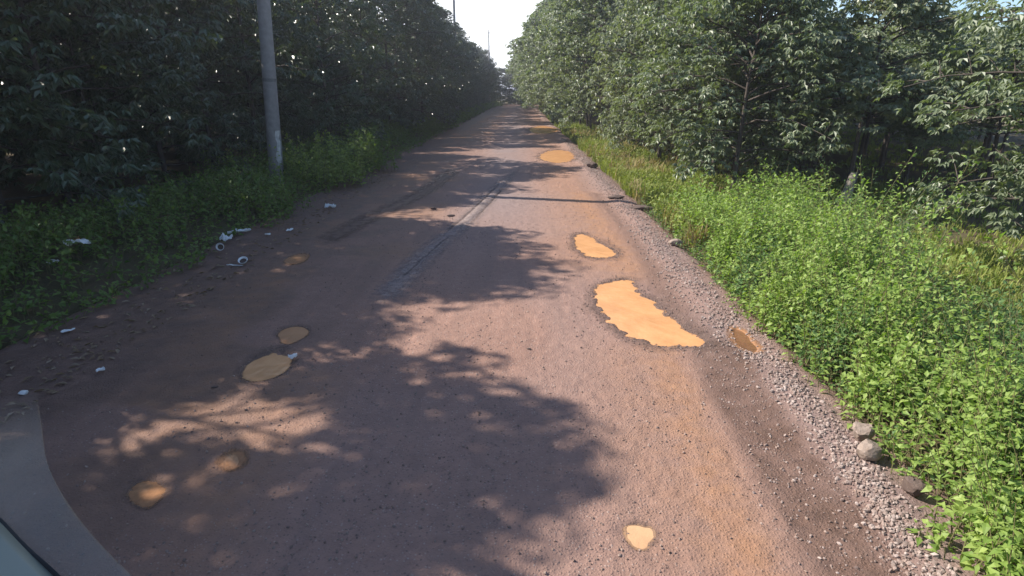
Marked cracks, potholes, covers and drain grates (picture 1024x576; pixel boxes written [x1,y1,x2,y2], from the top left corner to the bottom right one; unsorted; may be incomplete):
pothole [529,126,559,134]
pothole [128,479,167,508]
pothole [277,326,309,345]
pothole [241,349,293,382]
pothole [539,150,575,163]
pothole [572,234,618,259]
pothole [623,524,656,551]
pothole [284,253,309,265]
pothole [216,449,248,471]
pothole [728,327,763,354]
pothole [591,279,708,348]
